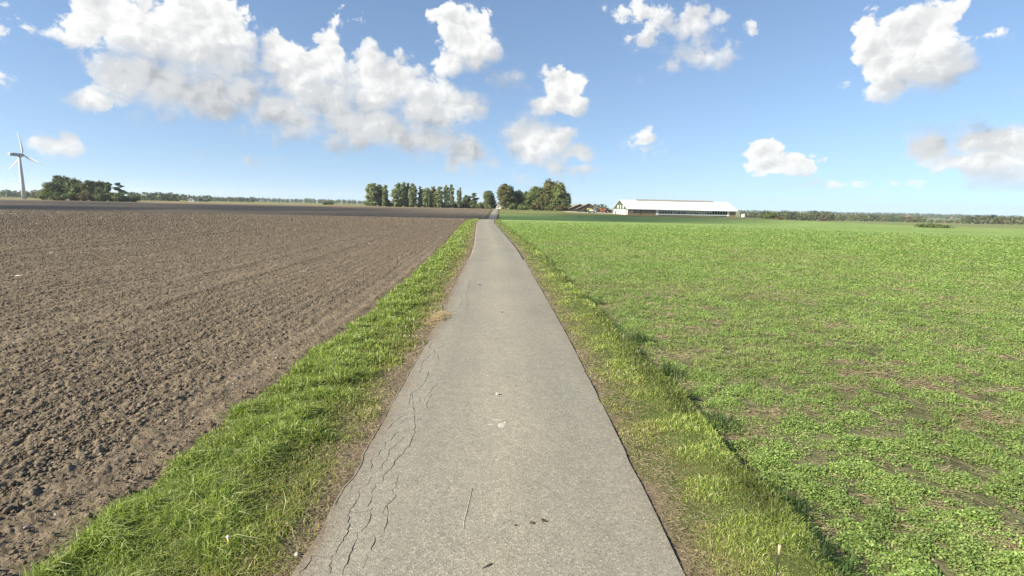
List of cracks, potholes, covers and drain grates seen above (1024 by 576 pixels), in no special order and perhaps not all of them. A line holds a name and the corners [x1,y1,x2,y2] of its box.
crack [299,340,442,575]
